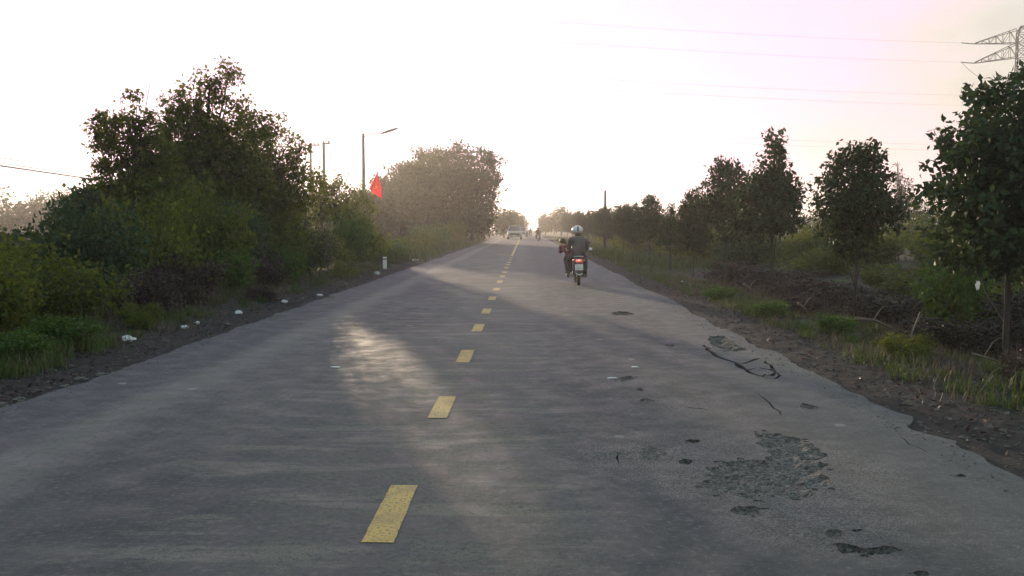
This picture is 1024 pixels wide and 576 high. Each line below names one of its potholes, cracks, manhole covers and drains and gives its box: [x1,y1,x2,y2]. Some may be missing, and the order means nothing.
pothole [708,336,747,352]
crack [703,345,781,379]
pothole [825,529,845,540]
pothole [831,543,903,557]
pothole [730,506,769,517]
pothole [695,430,835,503]
